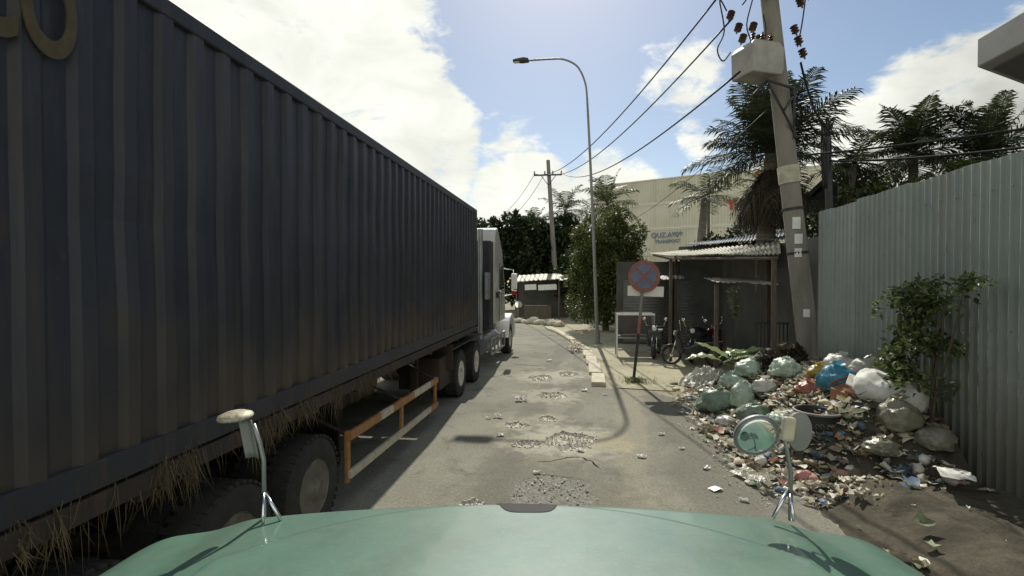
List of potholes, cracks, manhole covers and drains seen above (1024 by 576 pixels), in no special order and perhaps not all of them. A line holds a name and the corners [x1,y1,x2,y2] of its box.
pothole [510,473,598,507]
crack [538,457,601,469]
pothole [536,391,567,399]
pothole [511,439,541,449]
pothole [505,420,530,428]
pothole [542,430,597,452]
